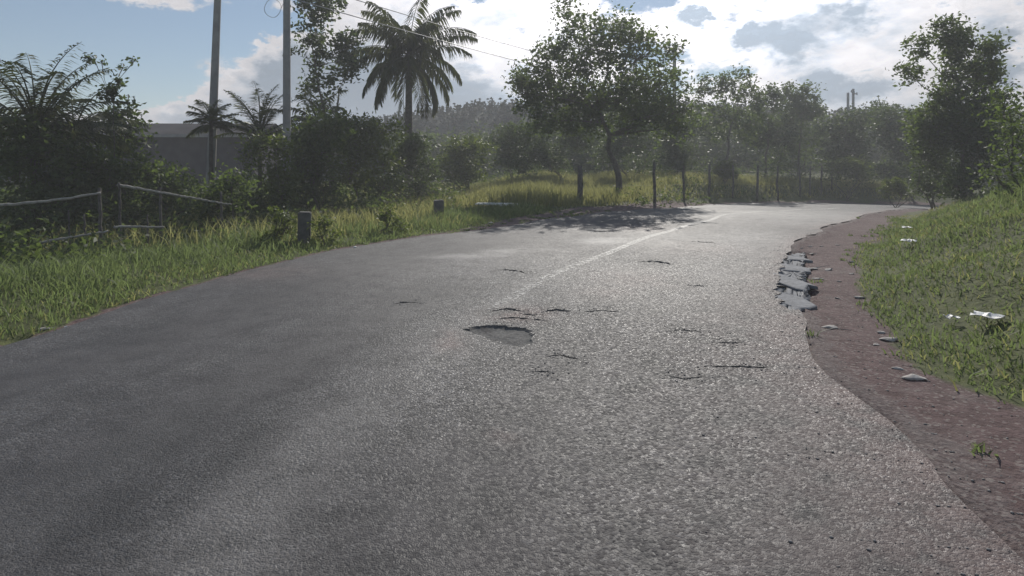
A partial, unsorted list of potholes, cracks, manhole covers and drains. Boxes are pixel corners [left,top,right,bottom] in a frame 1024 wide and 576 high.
pothole [464,325,535,347]
pothole [772,252,811,312]
crack [492,308,617,321]
crack [670,366,768,380]
